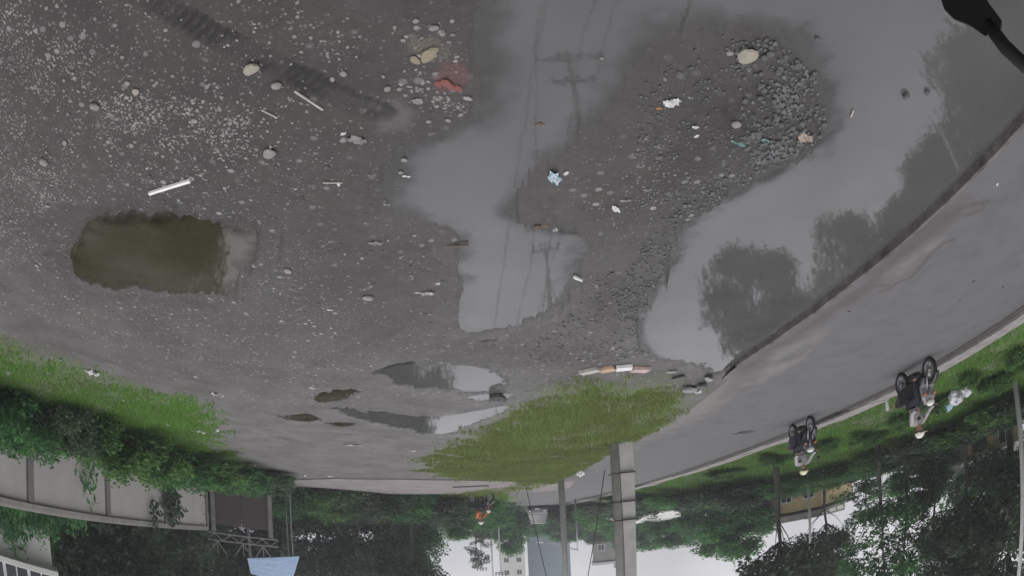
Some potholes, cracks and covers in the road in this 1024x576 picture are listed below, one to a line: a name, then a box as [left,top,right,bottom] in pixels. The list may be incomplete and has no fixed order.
pothole [383,0,1024,374]
pothole [70,209,257,296]
pothole [376,362,507,393]
pothole [314,389,358,403]
